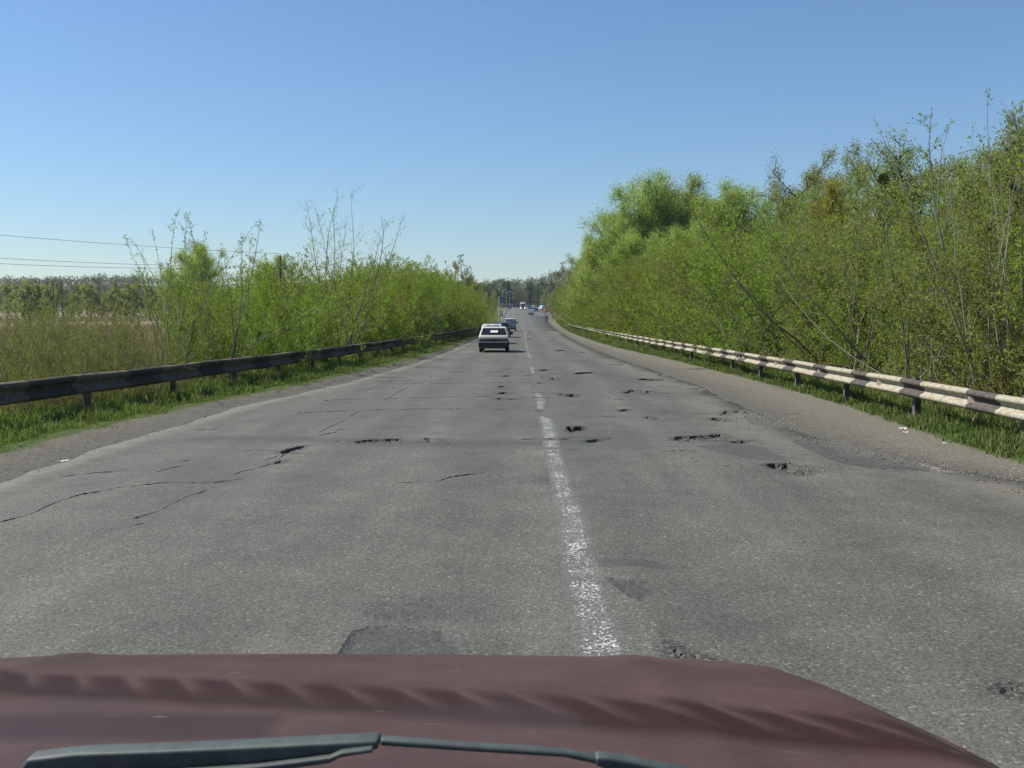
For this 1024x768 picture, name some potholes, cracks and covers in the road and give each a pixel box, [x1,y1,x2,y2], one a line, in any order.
pothole [674,434,725,442]
crack [405,471,484,483]
crack [0,429,353,527]
pothole [766,463,810,475]
pothole [1000,686,1024,695]
pothole [673,648,712,661]
